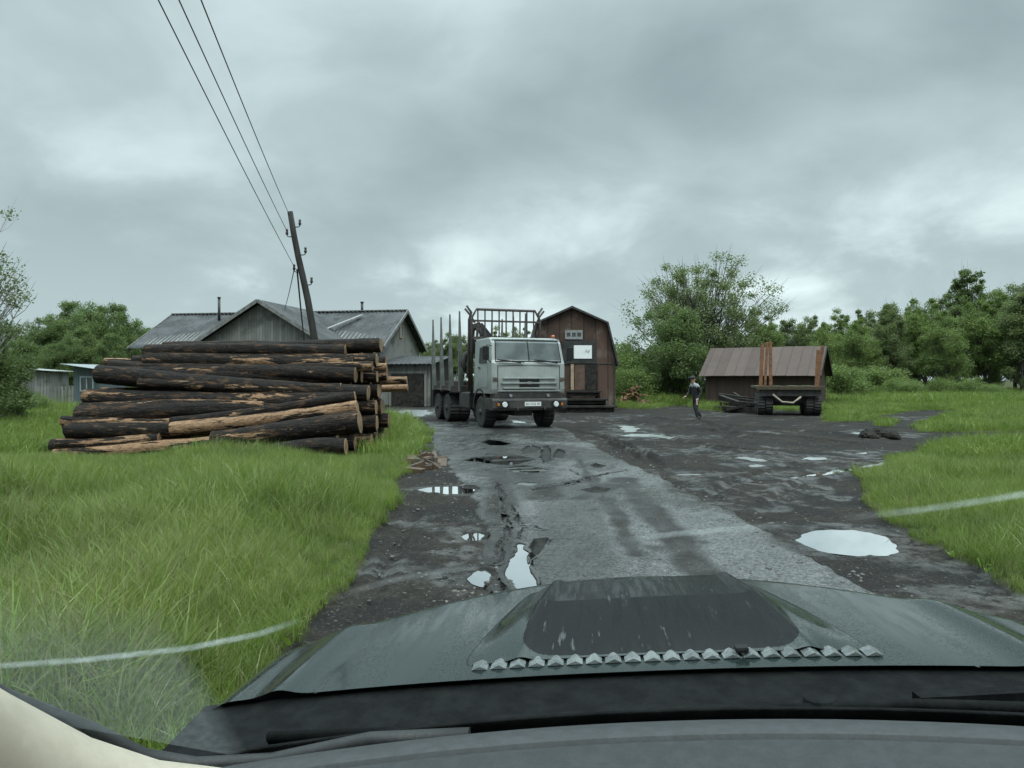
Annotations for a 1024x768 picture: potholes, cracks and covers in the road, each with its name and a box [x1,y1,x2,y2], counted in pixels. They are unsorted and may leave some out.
pothole [497,541,540,590]
crack [485,468,631,594]
pothole [413,484,484,495]
pothole [455,529,492,542]
pothole [459,455,537,465]
pothole [459,565,499,590]
pothole [523,536,551,565]
pothole [537,445,554,464]
pothole [519,444,543,454]
pothole [551,448,568,458]
